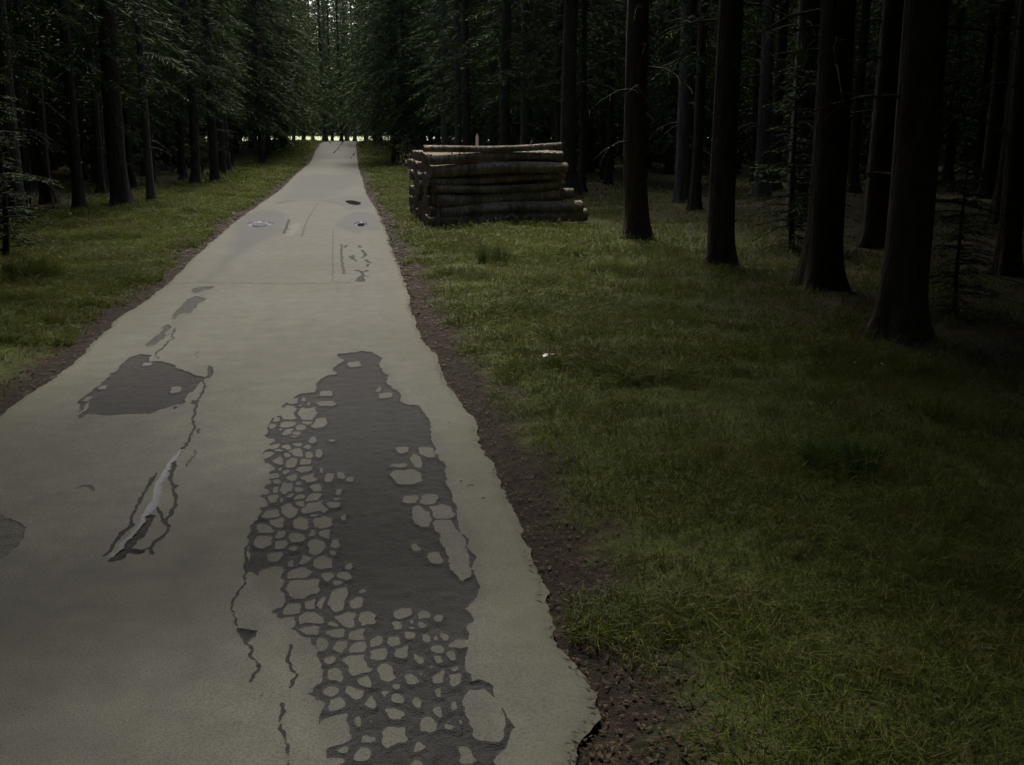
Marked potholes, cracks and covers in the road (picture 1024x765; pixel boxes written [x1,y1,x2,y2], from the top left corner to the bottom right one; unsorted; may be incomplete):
crack [244,643,261,682]
crack [339,244,371,277]
crack [278,644,299,765]
crack [230,540,250,626]
crack [75,328,209,562]
